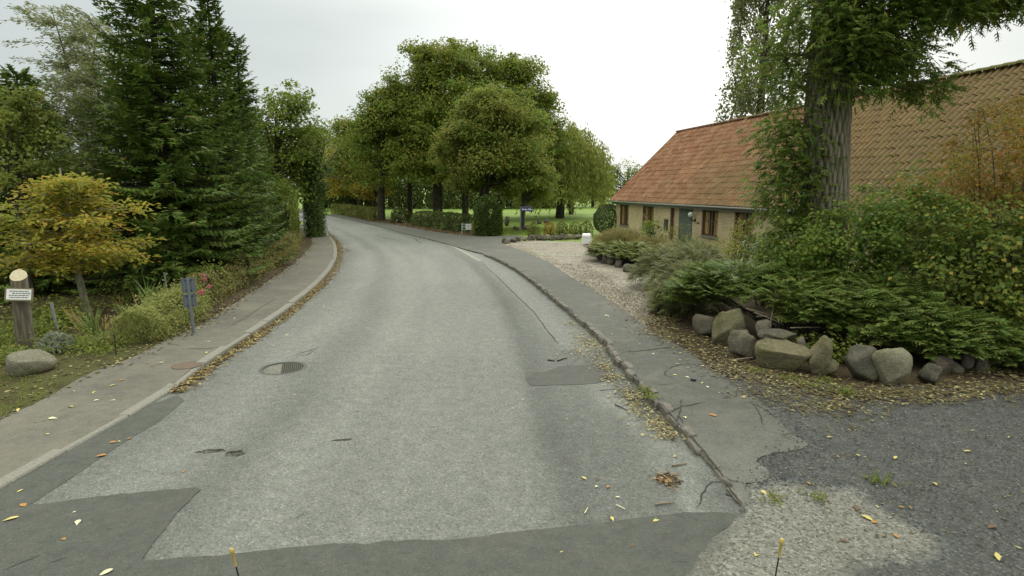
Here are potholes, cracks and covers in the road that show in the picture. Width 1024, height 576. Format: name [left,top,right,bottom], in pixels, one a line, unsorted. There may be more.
manhole cover [171,361,203,370]
crack [481,262,557,342]
pothole [225,450,246,458]
crack [625,346,742,507]
